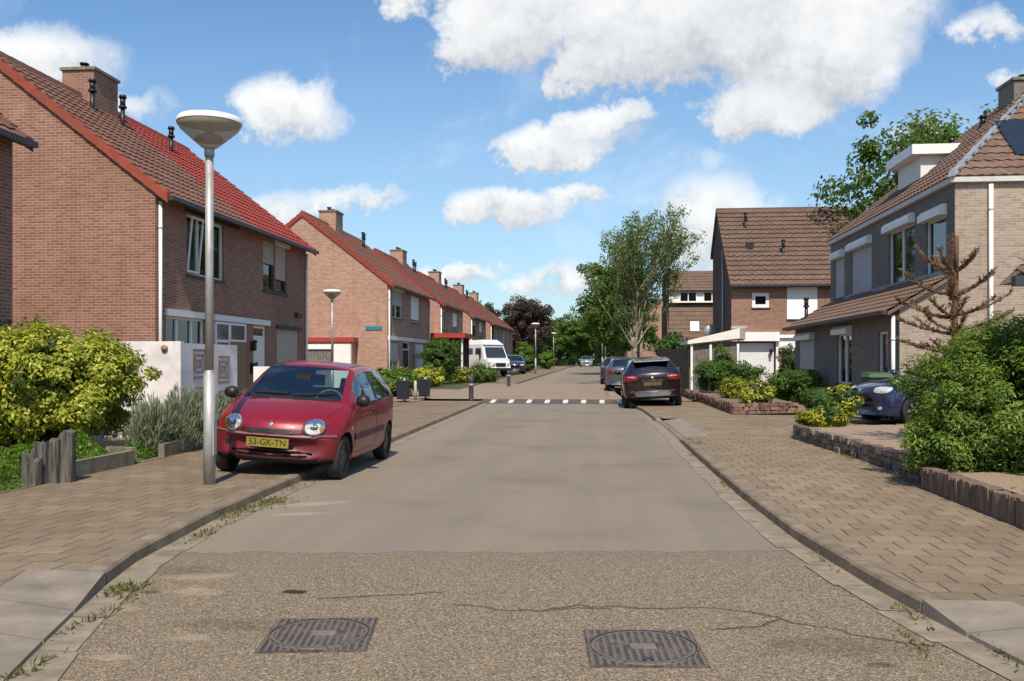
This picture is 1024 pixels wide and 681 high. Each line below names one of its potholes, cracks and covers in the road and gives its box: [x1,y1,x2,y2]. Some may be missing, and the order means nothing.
crack [316,591,934,647]
manhole cover [583,629,711,668]
manhole cover [254,617,378,653]
